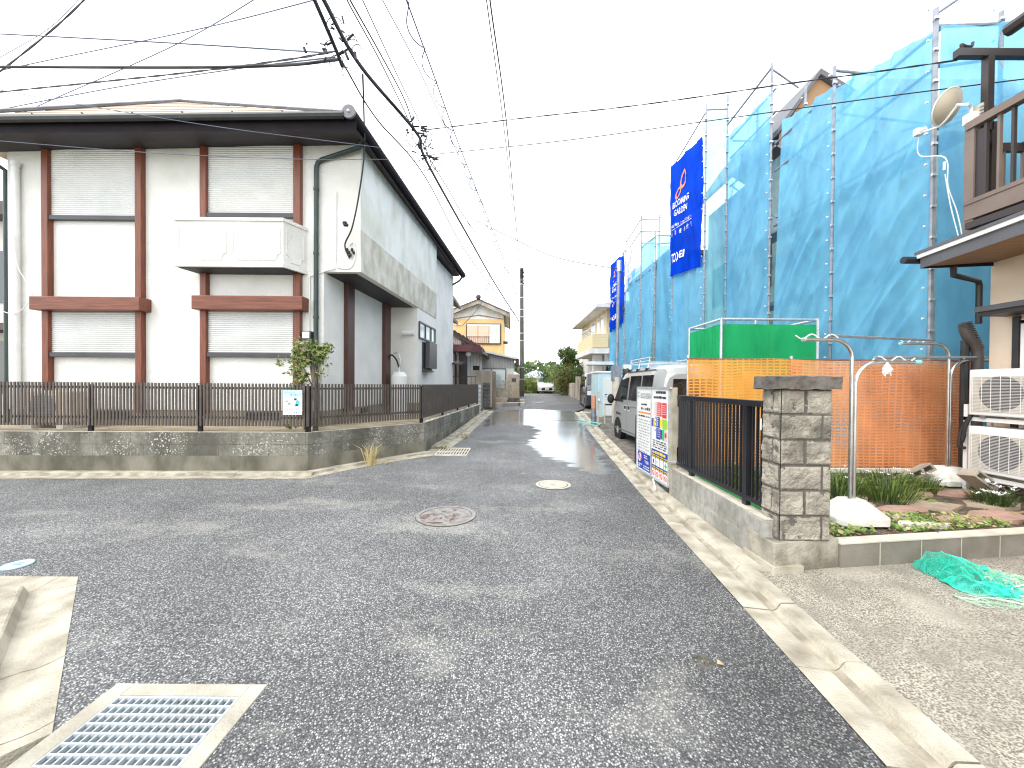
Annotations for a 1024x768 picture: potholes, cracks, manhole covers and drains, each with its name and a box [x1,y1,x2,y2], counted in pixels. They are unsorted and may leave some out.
drain grate [435,448,471,456]
manhole cover [536,480,571,489]
drain grate [7,683,267,768]
manhole cover [415,506,476,527]
